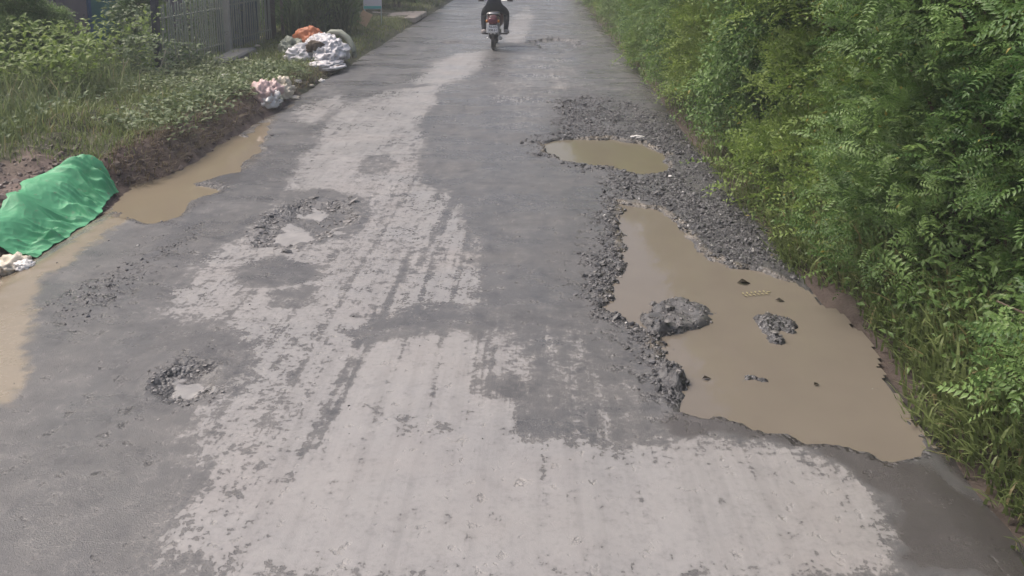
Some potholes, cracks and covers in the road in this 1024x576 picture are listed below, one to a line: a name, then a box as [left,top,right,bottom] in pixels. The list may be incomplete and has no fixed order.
pothole [244,194,372,253]
pothole [520,37,587,50]
pothole [581,199,937,468]
pothole [536,135,675,175]
